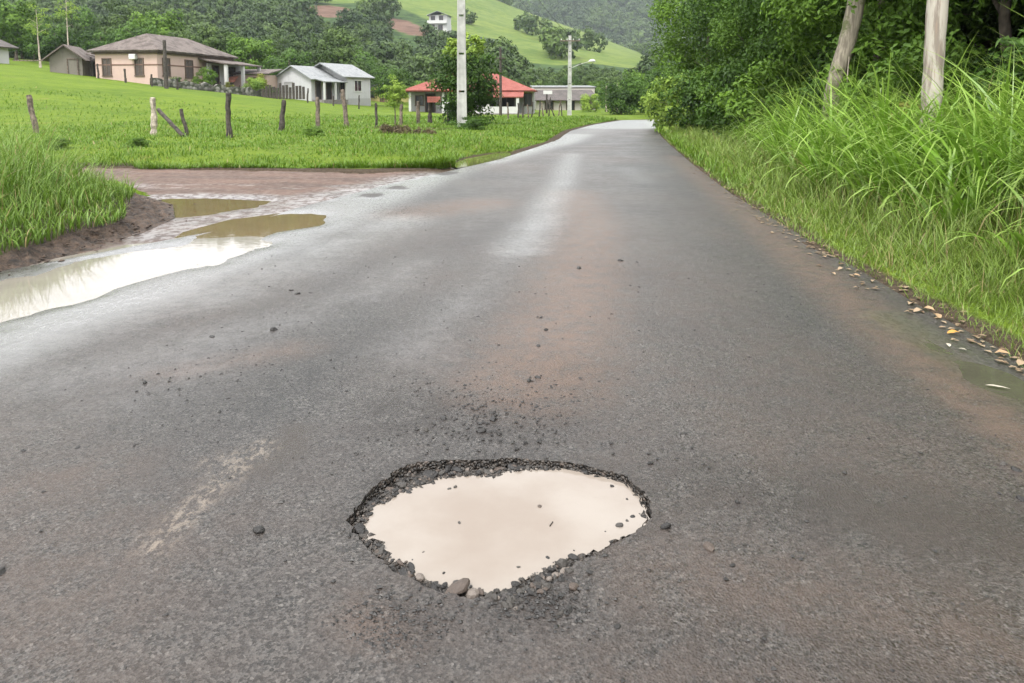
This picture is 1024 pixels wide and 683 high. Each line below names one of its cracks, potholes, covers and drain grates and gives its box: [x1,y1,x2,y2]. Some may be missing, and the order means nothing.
pothole [346,458,652,597]
